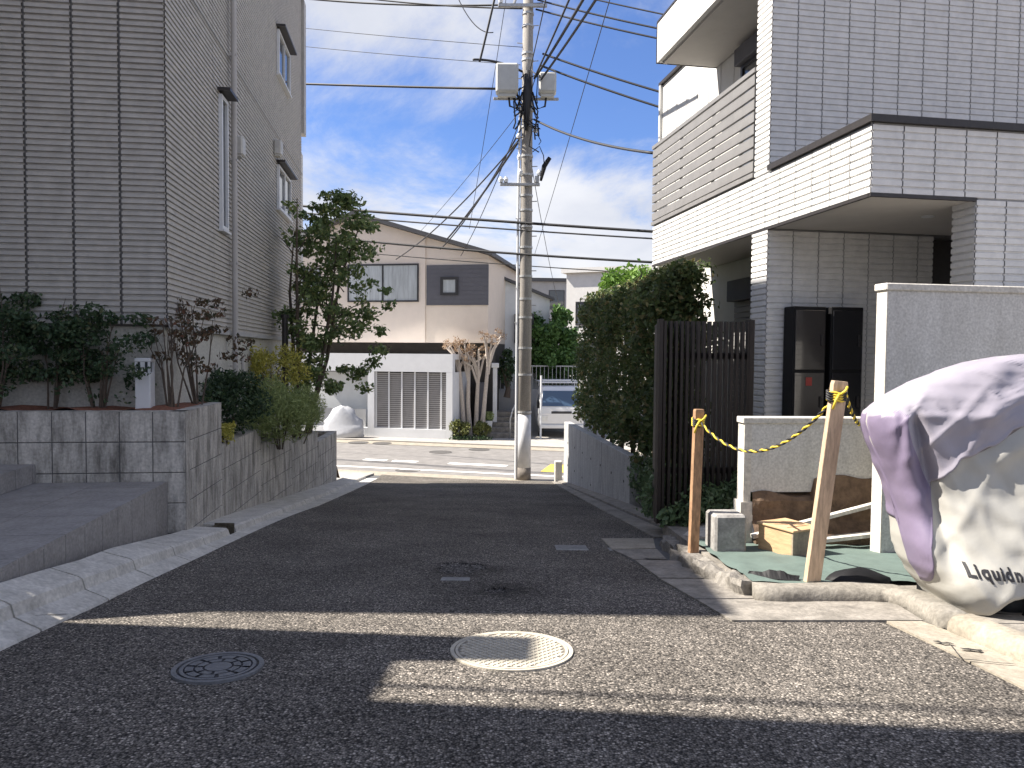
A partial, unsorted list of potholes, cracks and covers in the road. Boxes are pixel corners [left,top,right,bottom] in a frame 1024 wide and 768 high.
manhole cover [170,652,264,685]
crack [935,640,1013,664]
manhole cover [450,631,573,672]
pothole [436,561,487,575]
